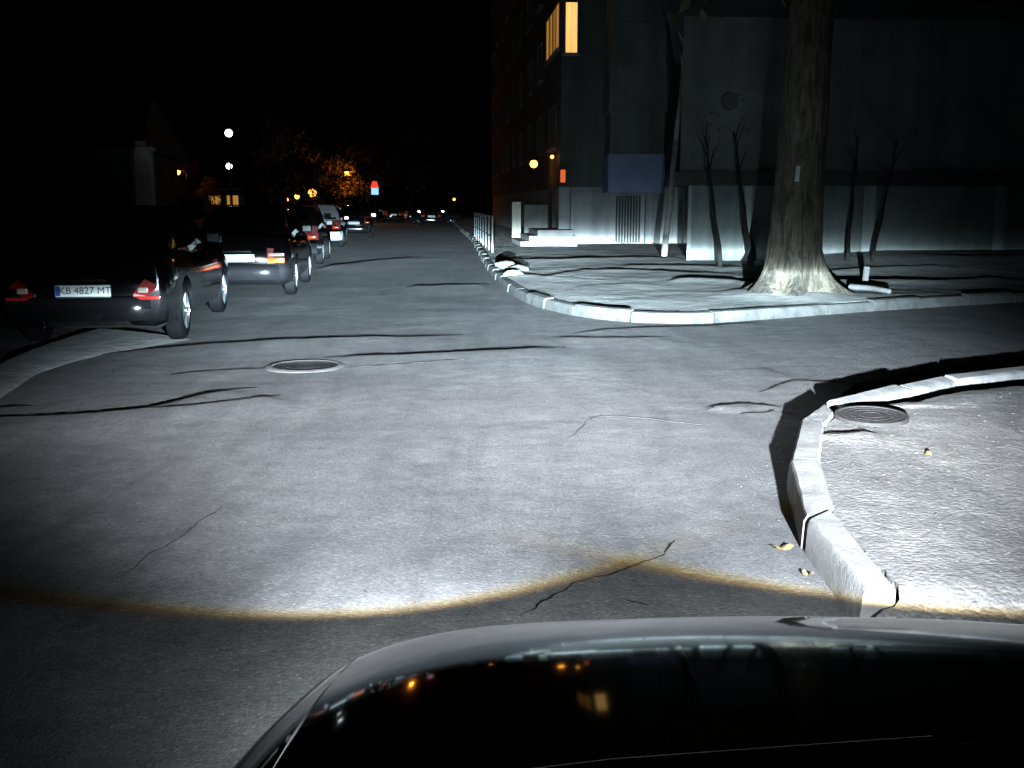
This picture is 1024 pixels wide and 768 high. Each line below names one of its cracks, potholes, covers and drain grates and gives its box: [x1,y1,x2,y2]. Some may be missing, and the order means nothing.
crack [105,334,555,367]
manhole cover [834,405,909,427]
crack [0,387,279,417]
crack [520,539,675,616]
manhole cover [264,360,345,373]
crack [567,367,853,439]
